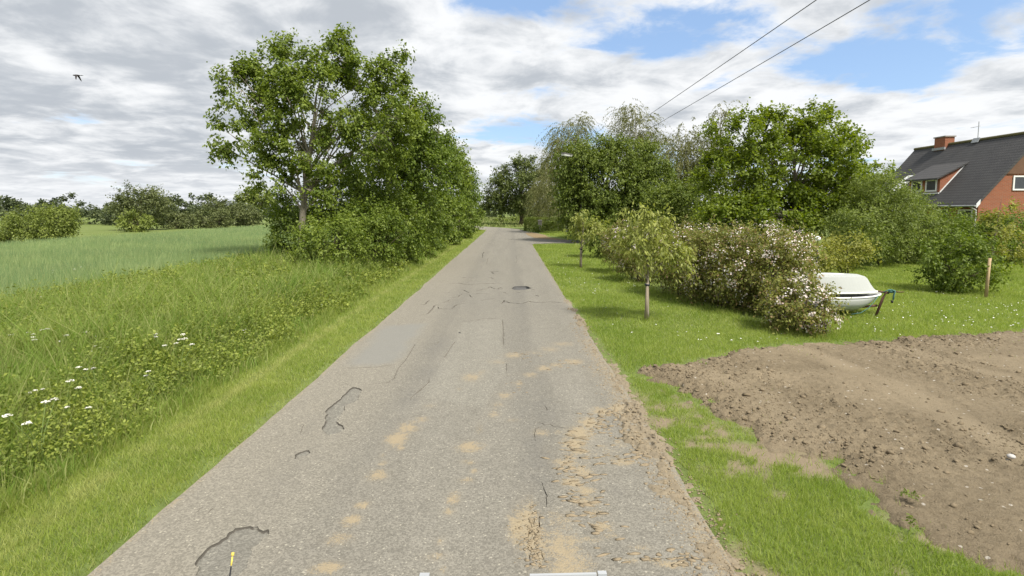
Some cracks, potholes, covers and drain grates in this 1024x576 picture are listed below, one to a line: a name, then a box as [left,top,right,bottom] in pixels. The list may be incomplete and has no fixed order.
crack [363,341,456,398]
crack [527,483,547,569]
pothole [195,526,269,576]
crack [423,253,561,345]
pothole [322,387,362,435]
